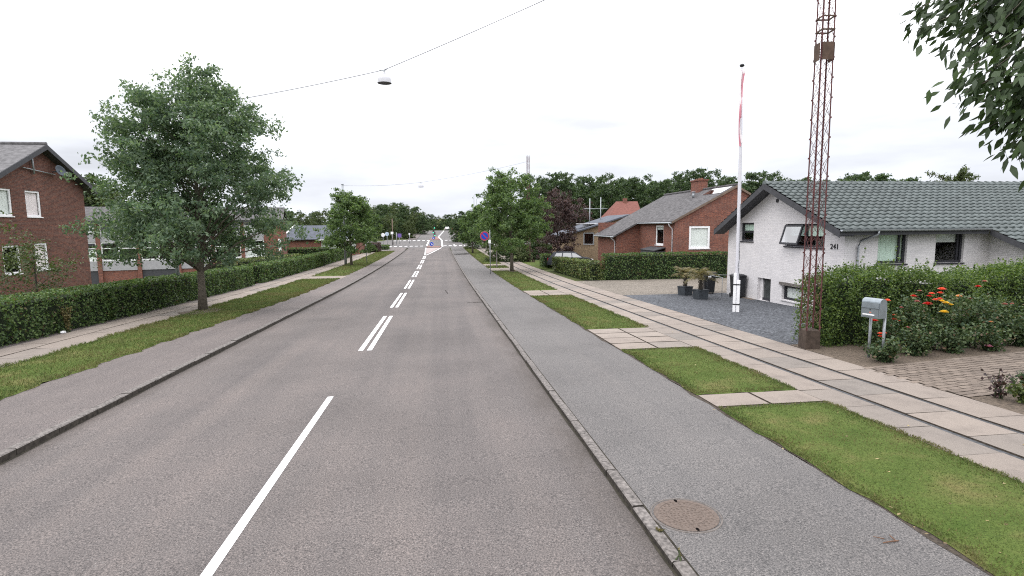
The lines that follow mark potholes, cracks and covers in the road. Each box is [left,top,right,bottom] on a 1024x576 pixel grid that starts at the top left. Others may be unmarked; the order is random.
manhole cover [650,498,723,533]
